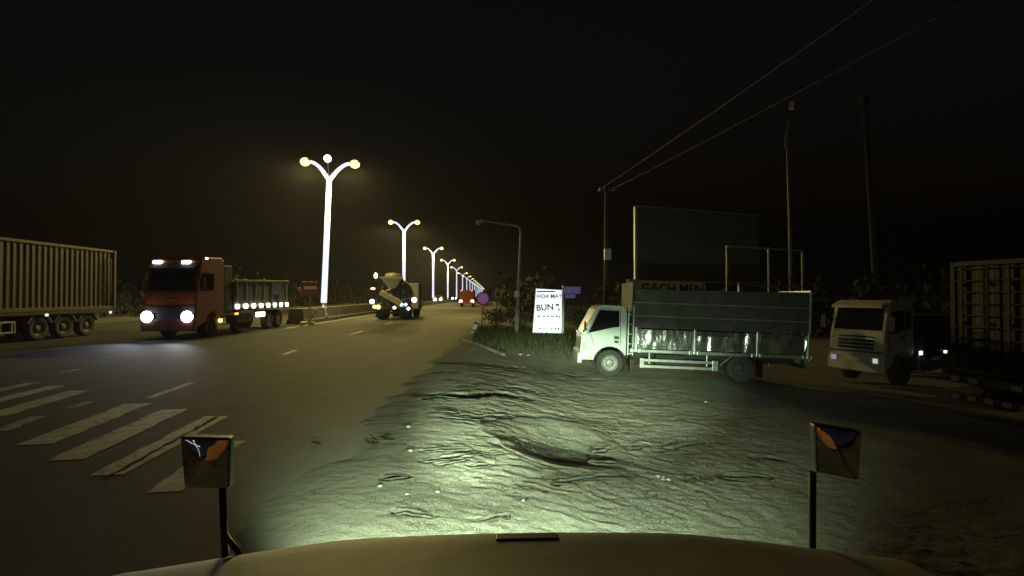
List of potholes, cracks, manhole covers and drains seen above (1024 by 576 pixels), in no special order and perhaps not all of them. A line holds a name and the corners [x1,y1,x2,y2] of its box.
crack [410,366,535,420]
pothole [479,417,635,472]
crack [419,447,503,468]
crack [537,378,721,497]
crack [481,512,509,522]
crack [359,420,393,443]
